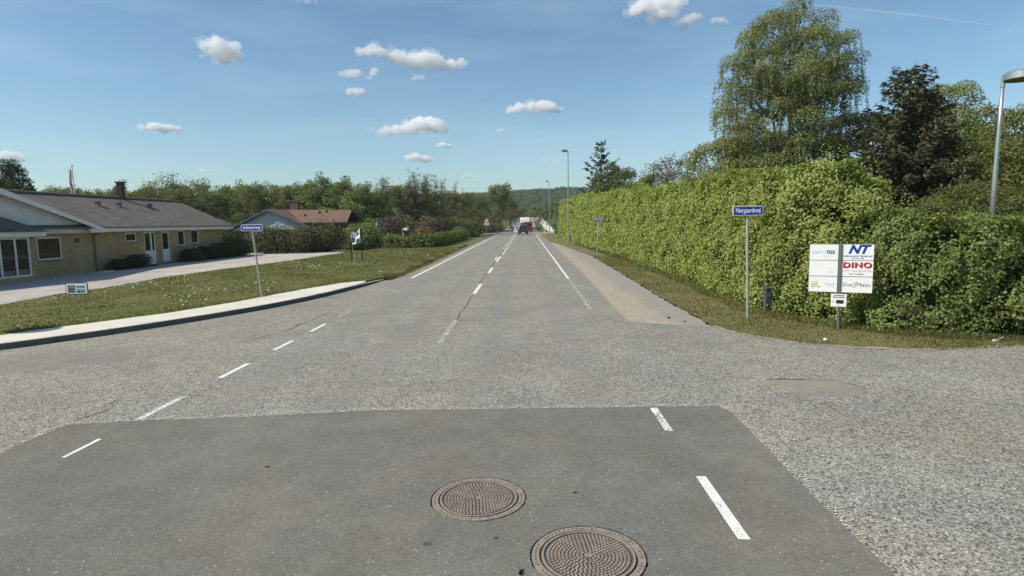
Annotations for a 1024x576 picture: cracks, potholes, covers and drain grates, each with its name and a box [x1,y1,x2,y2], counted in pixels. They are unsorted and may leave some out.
manhole cover [530,527,648,576]
manhole cover [430,478,527,522]
